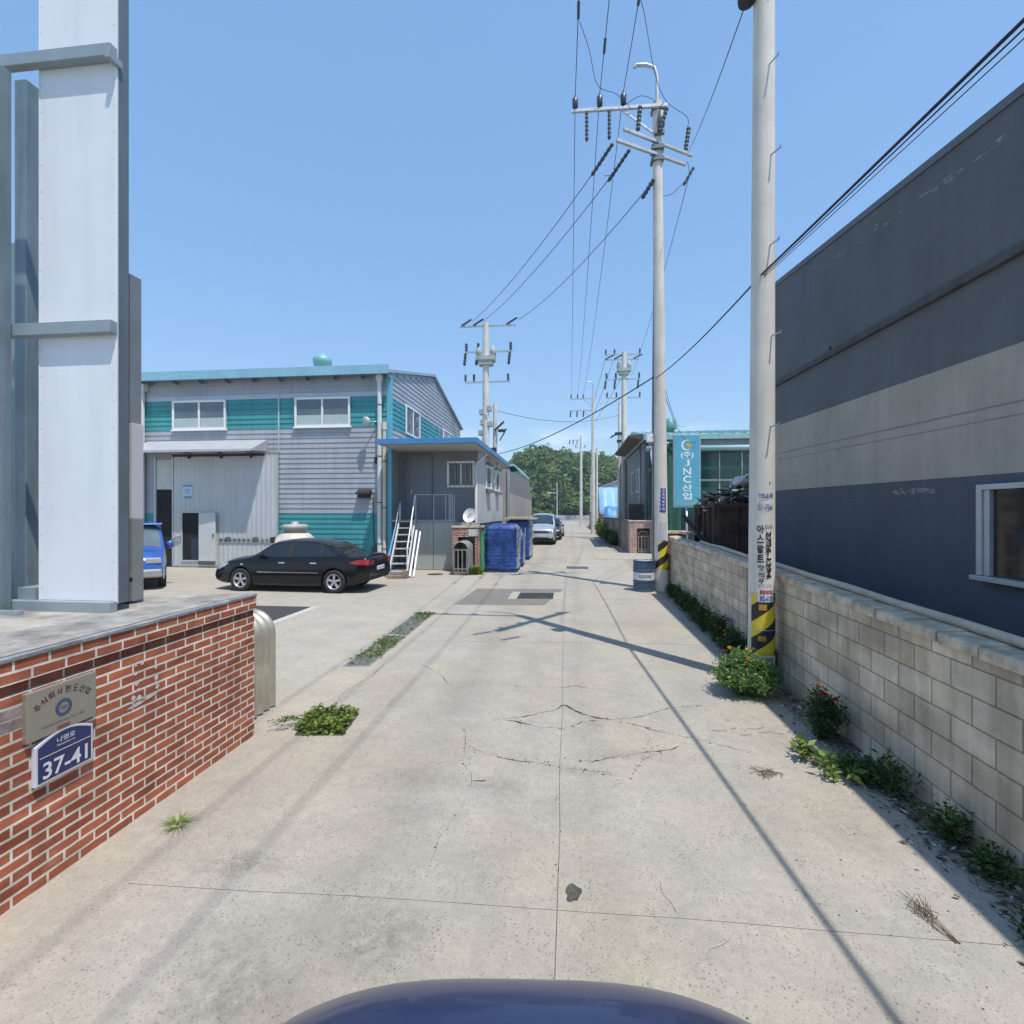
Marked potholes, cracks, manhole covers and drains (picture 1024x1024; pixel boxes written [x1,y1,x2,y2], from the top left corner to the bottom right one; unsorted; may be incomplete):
crack [426,729,679,877]
crack [498,685,751,753]
drain grate [508,592,563,600]
